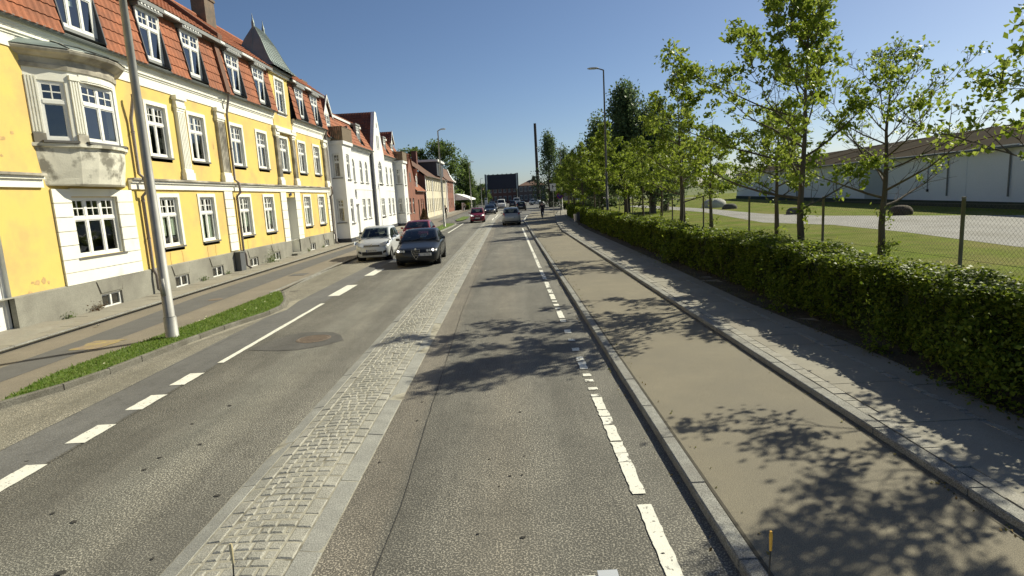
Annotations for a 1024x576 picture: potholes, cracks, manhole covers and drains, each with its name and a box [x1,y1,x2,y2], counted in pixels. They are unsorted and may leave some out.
manhole cover [296,335,331,343]
